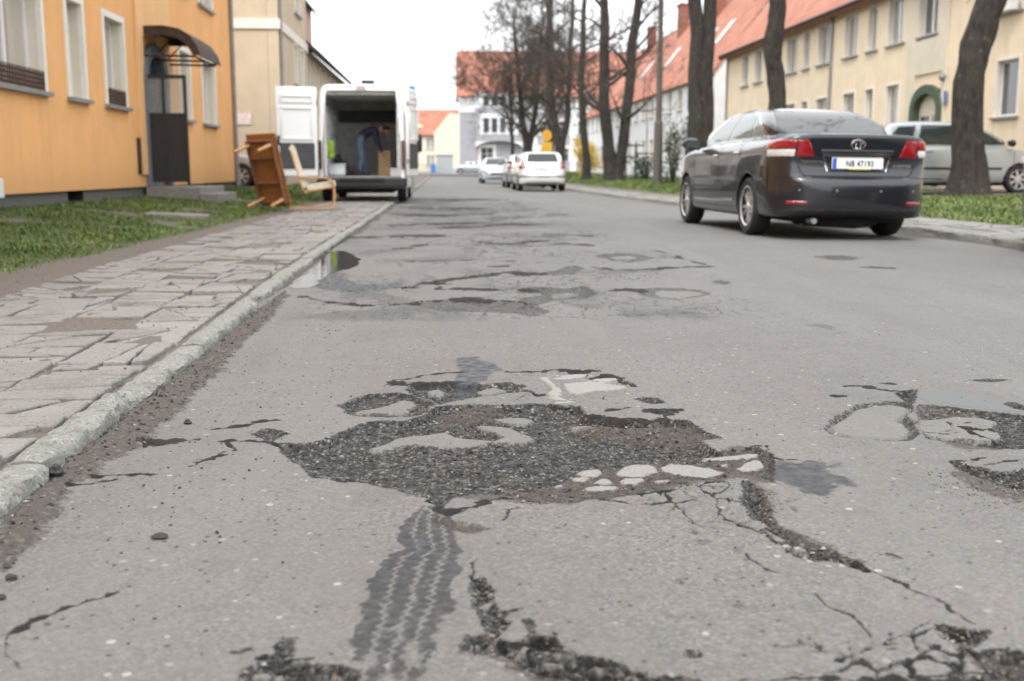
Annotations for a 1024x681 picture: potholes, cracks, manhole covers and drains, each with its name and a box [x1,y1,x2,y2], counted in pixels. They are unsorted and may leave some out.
pothole [252,428,289,442]
pothole [948,460,1024,493]
crack [742,551,780,574]
crack [139,419,282,467]
pothole [338,392,436,418]
pothole [896,389,917,407]
crack [293,198,761,321]
crack [62,472,162,487]
pothole [270,403,777,507]
